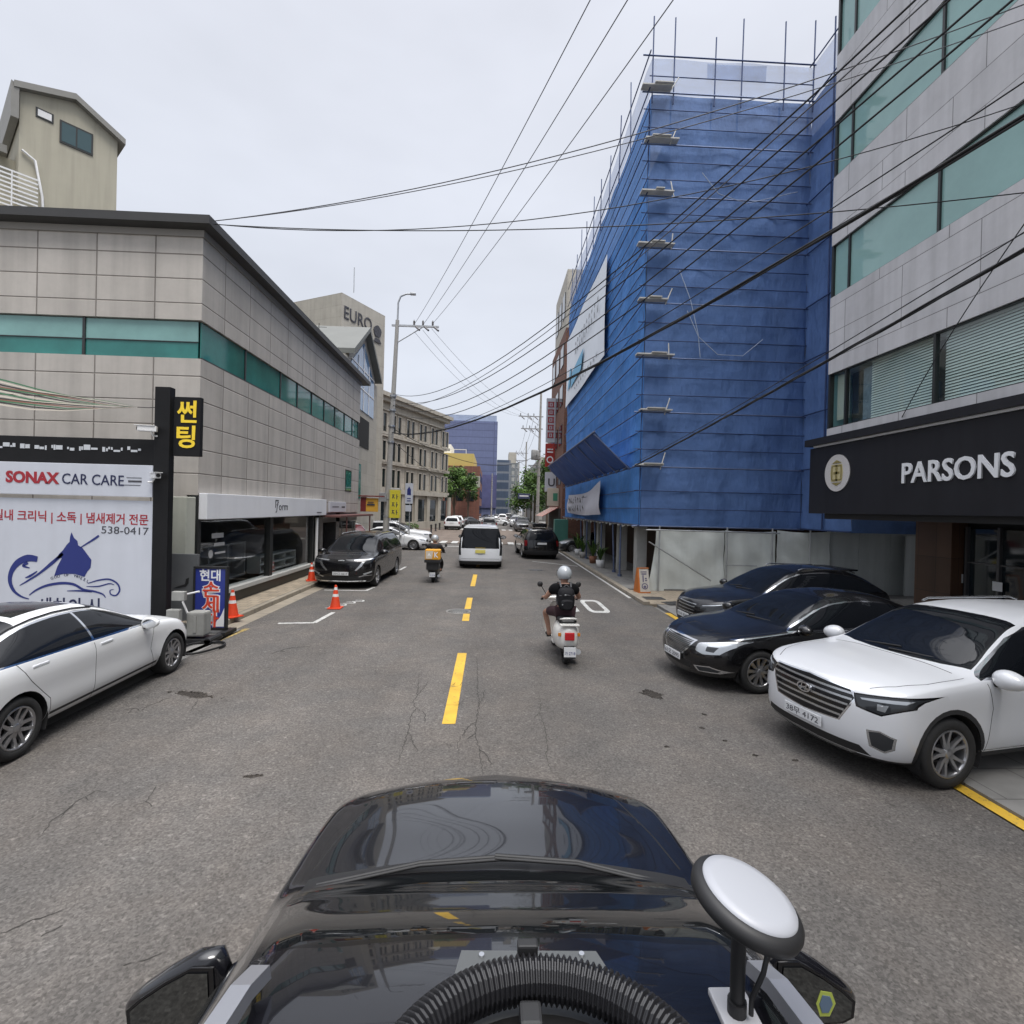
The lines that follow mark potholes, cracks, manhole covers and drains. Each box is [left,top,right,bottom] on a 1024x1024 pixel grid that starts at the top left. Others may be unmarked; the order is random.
crack [398,661,491,776]
crack [534,697,550,767]
crack [2,909,63,936]
pothole [632,686,676,703]
crack [42,790,108,834]
pothole [231,771,273,781]
